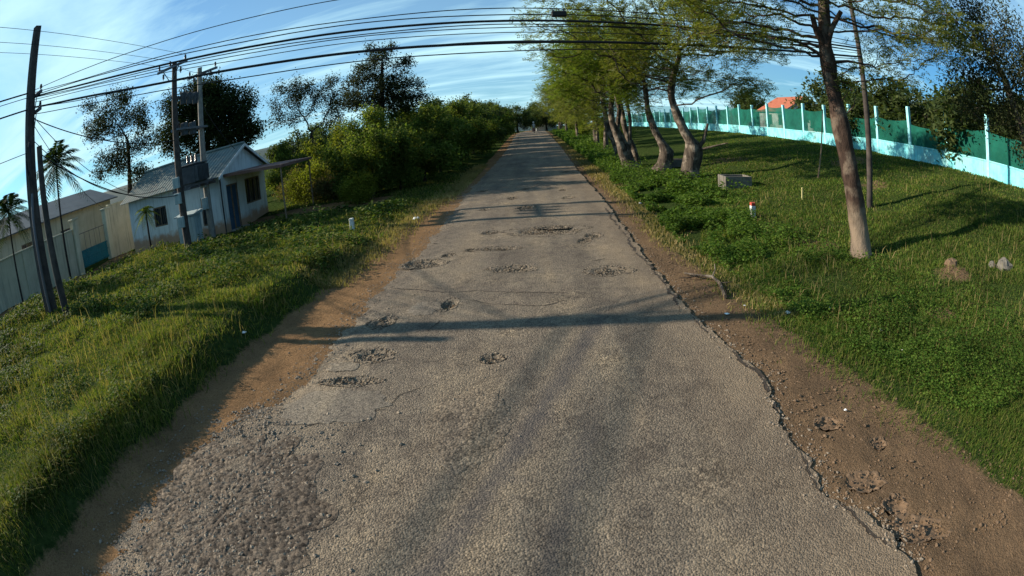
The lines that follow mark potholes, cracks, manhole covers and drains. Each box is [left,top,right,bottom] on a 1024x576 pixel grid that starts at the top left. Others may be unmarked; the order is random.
pothole [348,346,397,364]
pothole [399,259,450,269]
crack [840,503,892,548]
pothole [484,264,538,273]
pothole [478,353,507,364]
pothole [365,314,398,330]
pothole [317,376,387,387]
pothole [582,265,638,277]
pothole [497,225,593,237]
